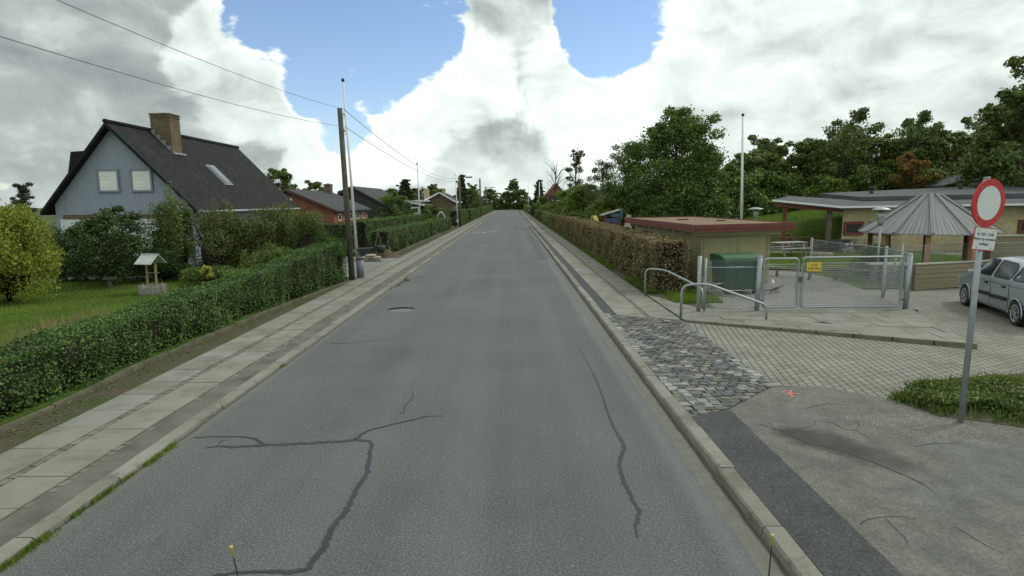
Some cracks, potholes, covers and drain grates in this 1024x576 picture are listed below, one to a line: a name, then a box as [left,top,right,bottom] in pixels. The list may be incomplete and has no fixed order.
crack [579,348,642,538]
